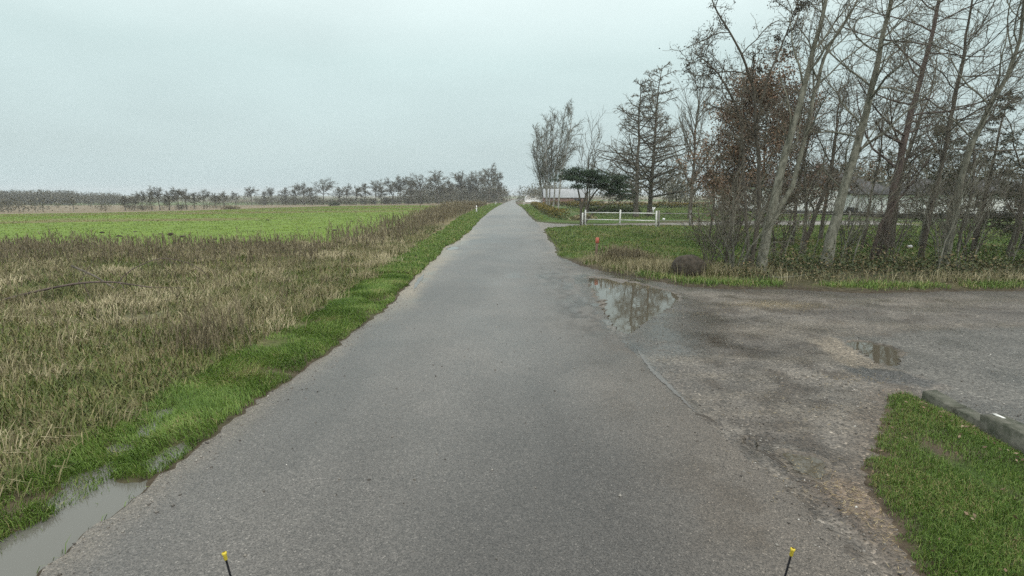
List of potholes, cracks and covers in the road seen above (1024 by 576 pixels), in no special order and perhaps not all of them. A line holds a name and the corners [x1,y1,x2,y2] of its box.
pothole [774,448,832,482]
pothole [742,435,761,449]
pothole [845,339,907,366]
